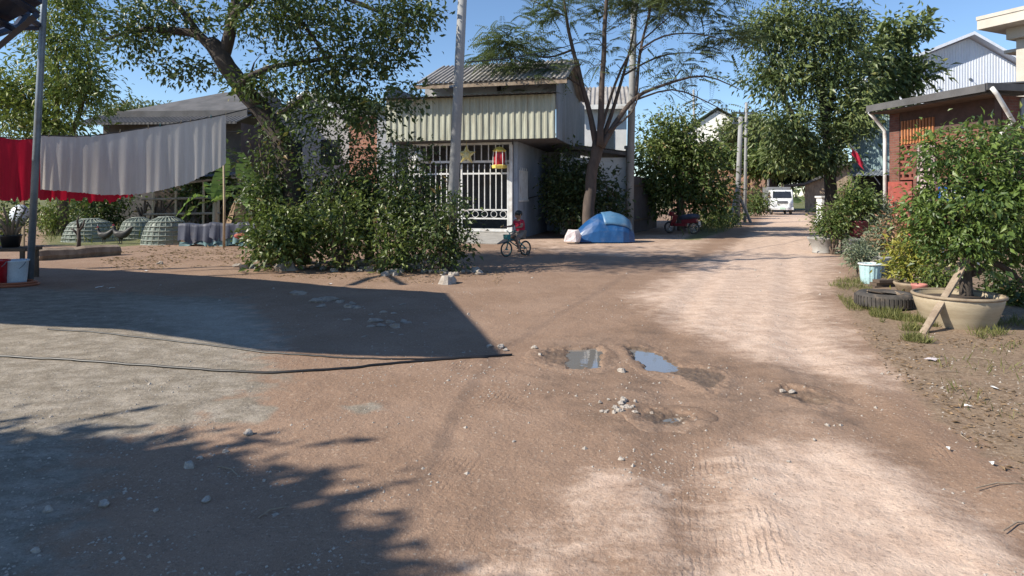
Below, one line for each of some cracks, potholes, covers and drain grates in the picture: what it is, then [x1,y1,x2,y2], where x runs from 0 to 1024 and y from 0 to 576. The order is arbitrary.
pothole [616,403,719,434]
pothole [609,342,742,398]
pothole [523,344,621,374]
